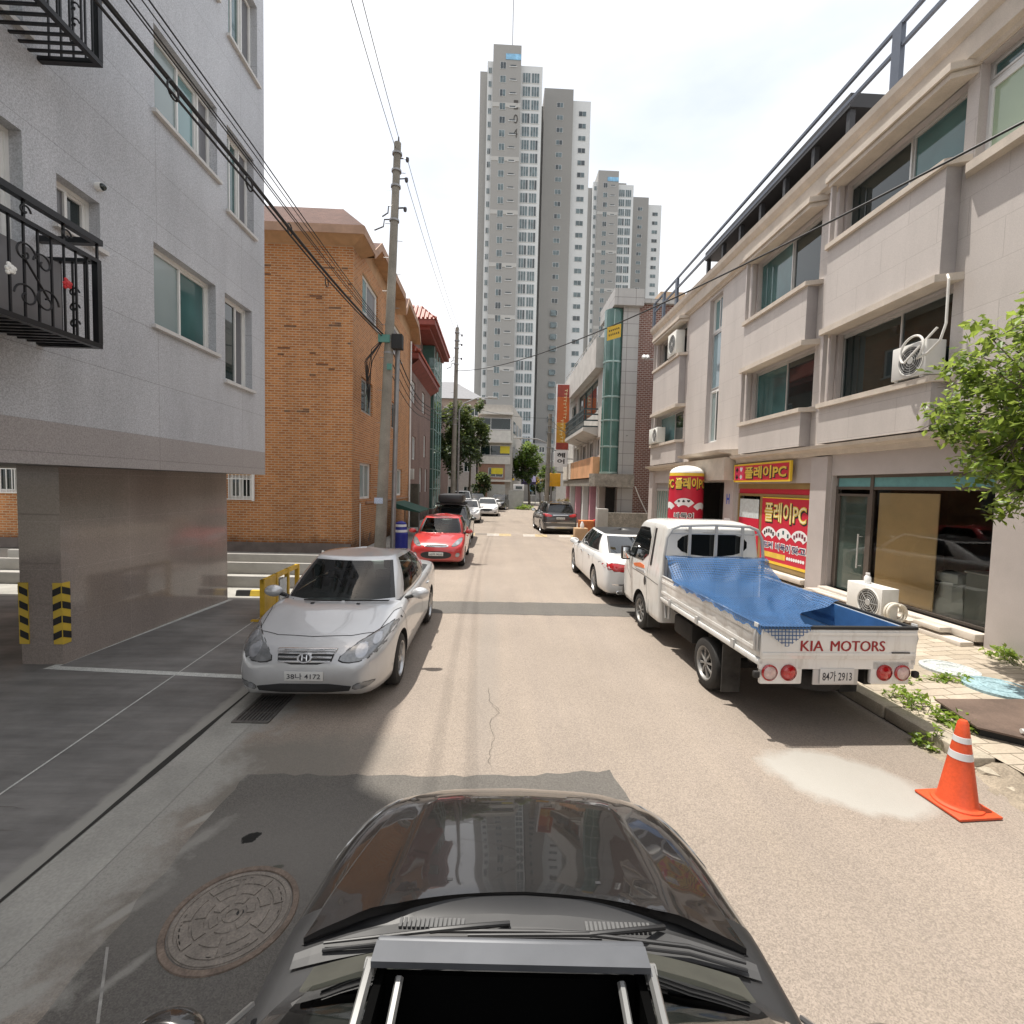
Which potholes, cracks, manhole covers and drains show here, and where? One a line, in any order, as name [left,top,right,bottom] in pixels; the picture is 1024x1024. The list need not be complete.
manhole cover [156,866,299,978]
drain grate [231,693,295,723]
